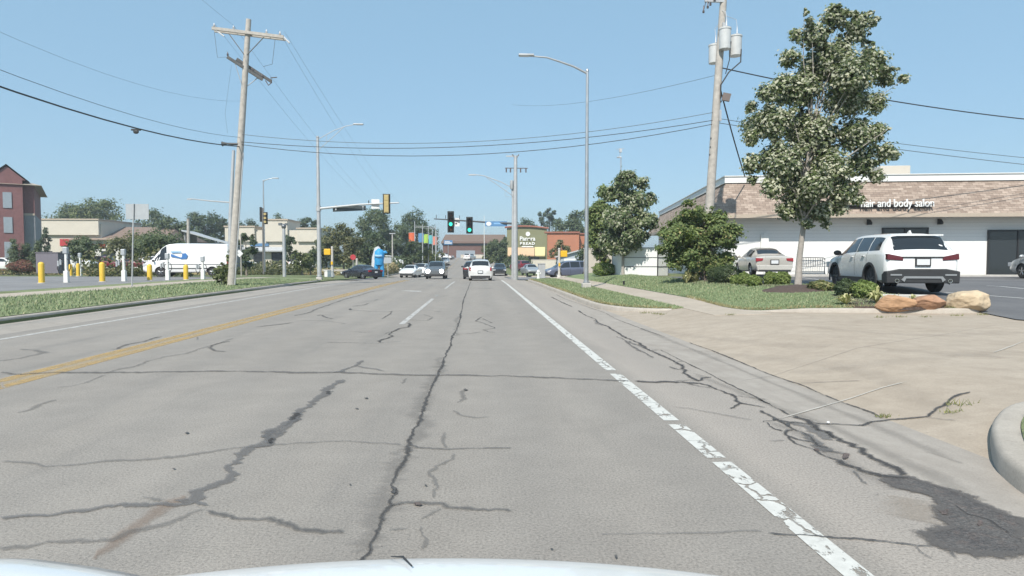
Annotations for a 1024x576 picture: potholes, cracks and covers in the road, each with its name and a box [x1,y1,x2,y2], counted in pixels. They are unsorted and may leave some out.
crack [5,284,625,560]
crack [552,294,969,495]
